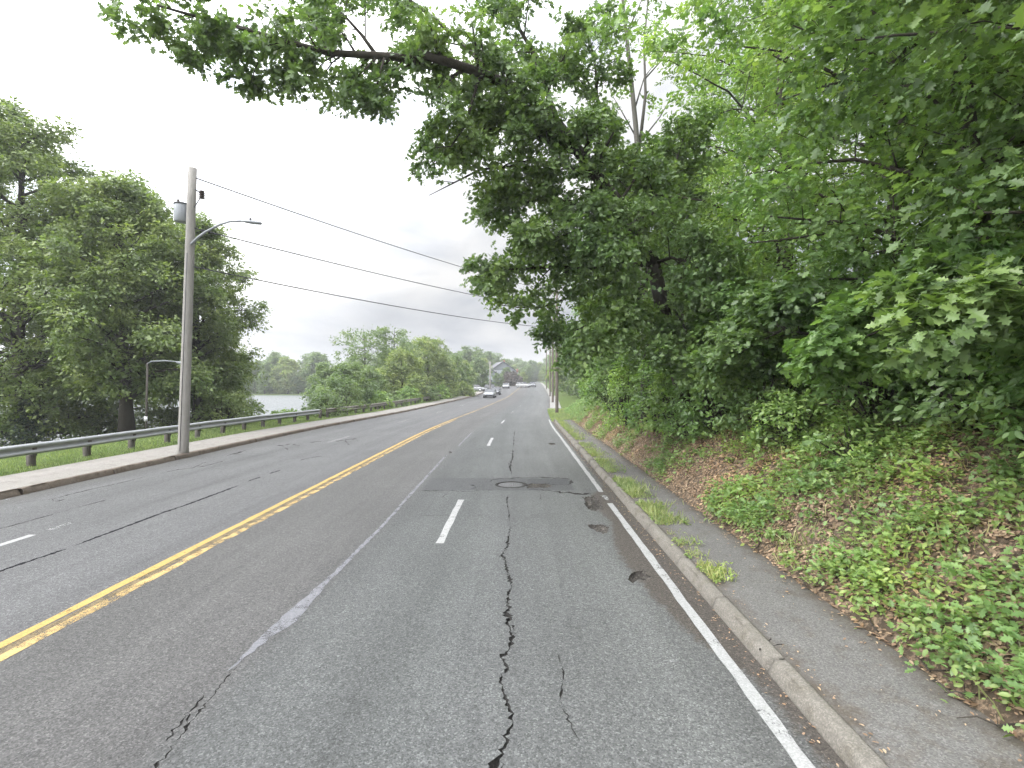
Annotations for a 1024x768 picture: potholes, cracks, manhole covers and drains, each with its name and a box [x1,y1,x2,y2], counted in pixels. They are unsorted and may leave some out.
pothole [582,496,604,511]
crack [154,668,236,768]
pothole [588,524,609,534]
pothole [628,570,651,583]
crack [422,431,590,768]
